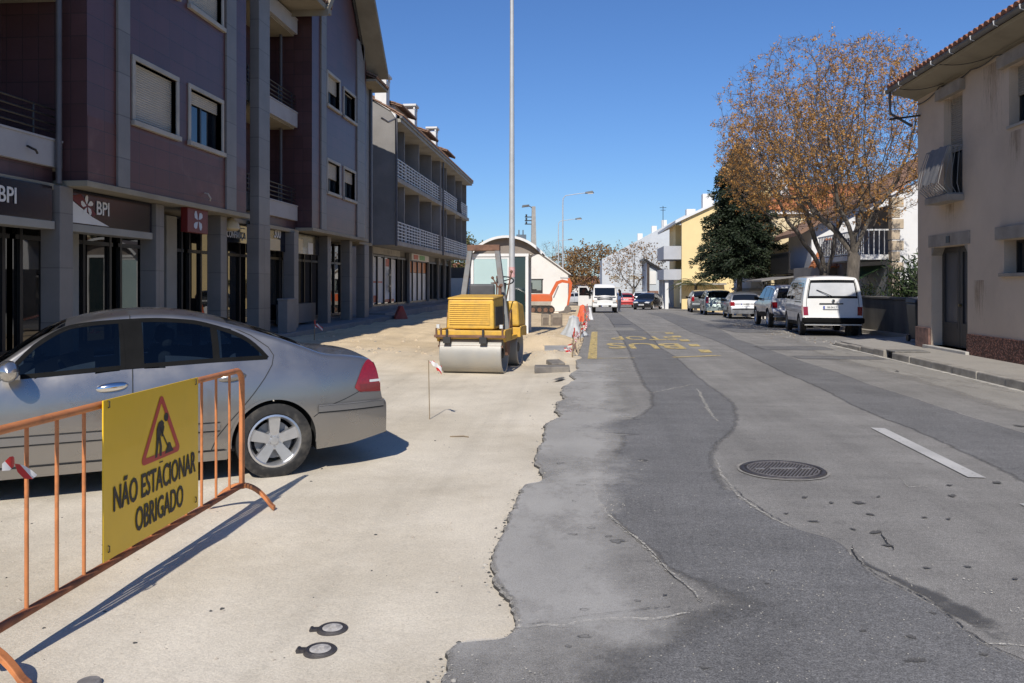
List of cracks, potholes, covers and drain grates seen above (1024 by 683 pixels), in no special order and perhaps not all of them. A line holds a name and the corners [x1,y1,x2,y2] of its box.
utility cover [295,642,337,659]
utility cover [309,622,348,636]
crack [514,465,703,628]
manhole cover [737,460,830,480]
